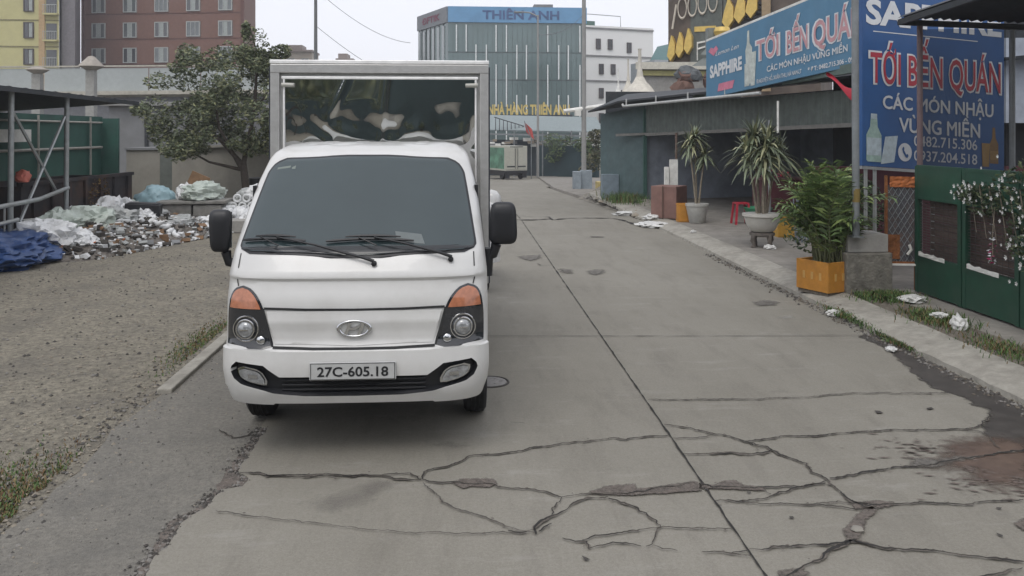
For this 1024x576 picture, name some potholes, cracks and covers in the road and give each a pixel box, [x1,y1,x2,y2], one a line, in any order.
crack [702,539,1024,576]
crack [216,414,1024,550]
manhole cover [487,376,509,388]
